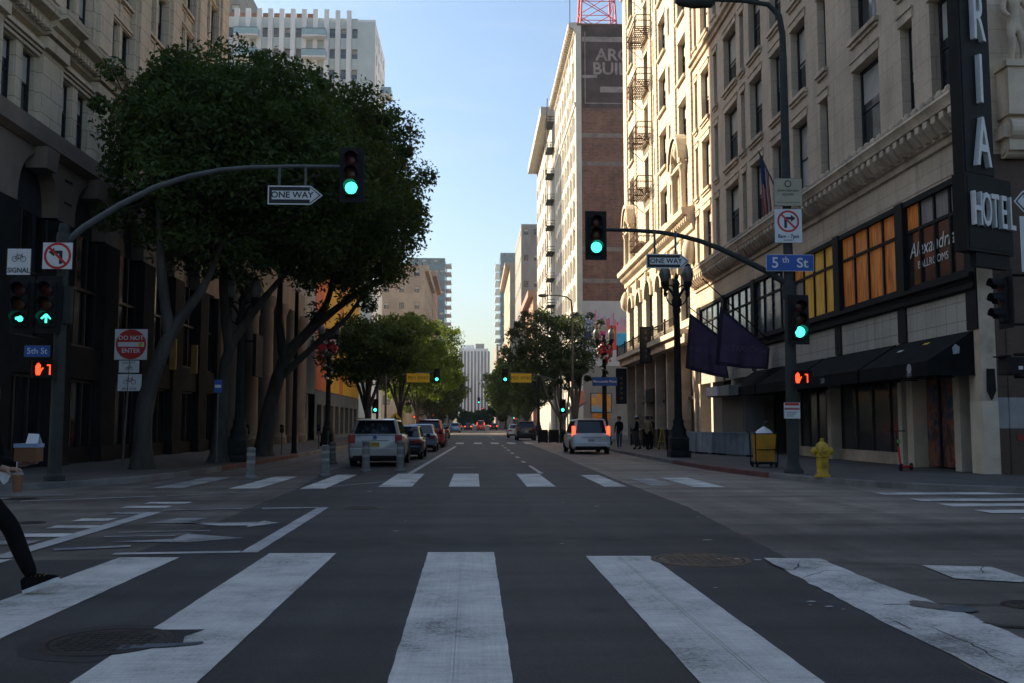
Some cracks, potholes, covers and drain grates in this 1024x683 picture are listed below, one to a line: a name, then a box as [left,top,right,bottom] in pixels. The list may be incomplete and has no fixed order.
crack [930,626,1014,662]
manhole cover [1000,600,1024,610]
manhole cover [16,624,174,662]
manhole cover [651,553,752,568]
